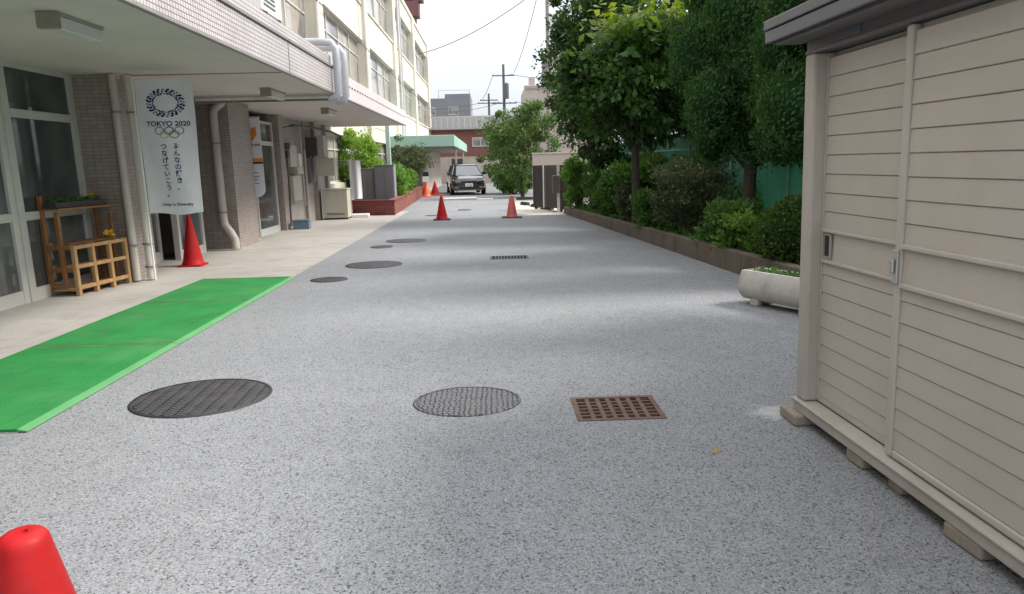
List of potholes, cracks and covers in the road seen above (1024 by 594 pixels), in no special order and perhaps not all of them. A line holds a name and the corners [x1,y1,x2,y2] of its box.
drain grate [570,395,667,422]
manhole cover [413,386,521,417]
manhole cover [127,378,273,418]
manhole cover [345,261,402,269]
